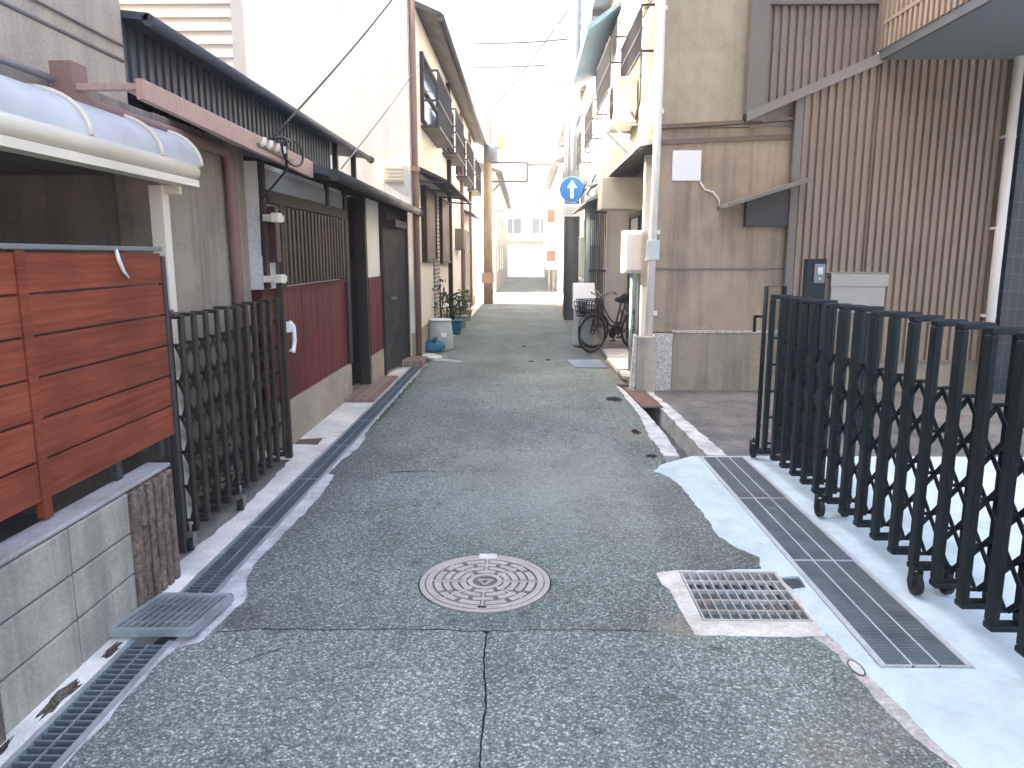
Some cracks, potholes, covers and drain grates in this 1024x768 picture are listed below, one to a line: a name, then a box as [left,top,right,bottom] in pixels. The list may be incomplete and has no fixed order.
drain grate [788,560,974,668]
drain grate [331,420,374,446]
drain grate [247,479,321,528]
drain grate [180,527,277,593]
drain grate [356,401,391,421]
manhole cover [420,554,550,613]
drain grate [0,640,174,768]
drain grate [376,386,405,402]
drain grate [656,570,825,637]
crack [216,628,654,768]
drain grate [296,445,351,479]
drain grate [109,592,234,645]
